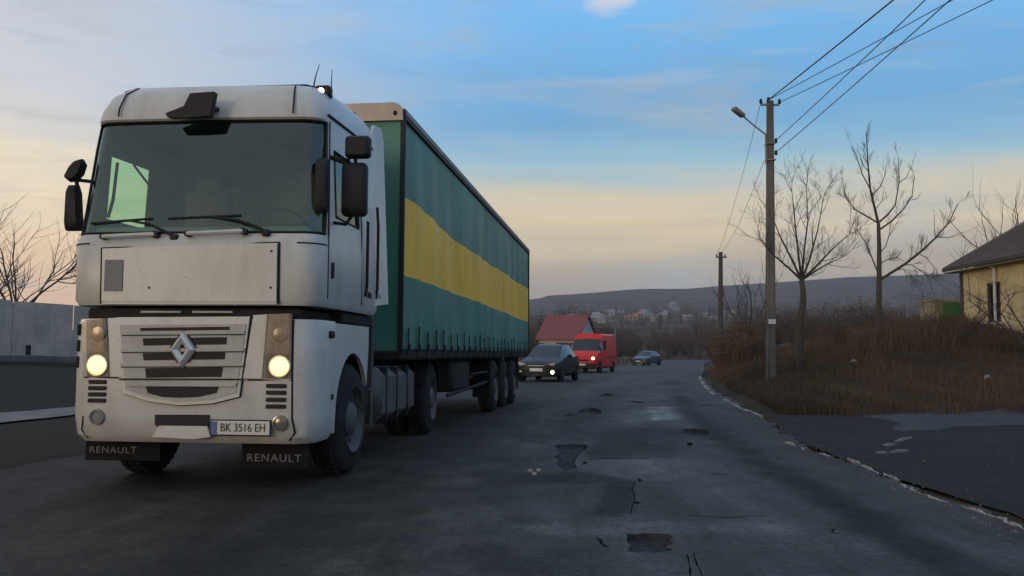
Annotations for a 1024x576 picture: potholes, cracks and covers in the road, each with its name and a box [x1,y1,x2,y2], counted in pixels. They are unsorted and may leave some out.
pothole [626,533,673,553]
pothole [554,444,588,470]
